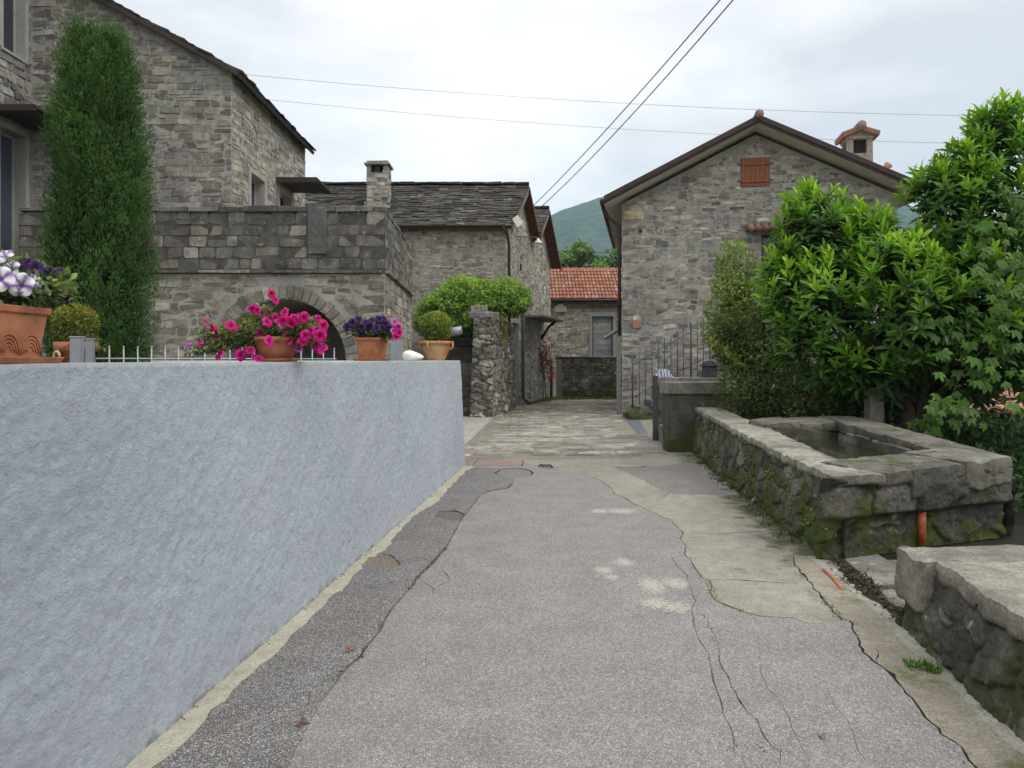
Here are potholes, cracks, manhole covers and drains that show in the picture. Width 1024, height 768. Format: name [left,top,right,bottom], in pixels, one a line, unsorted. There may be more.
pothole [365,553,400,568]
crack [588,466,978,768]
crack [316,487,509,712]
pothole [435,510,464,521]
